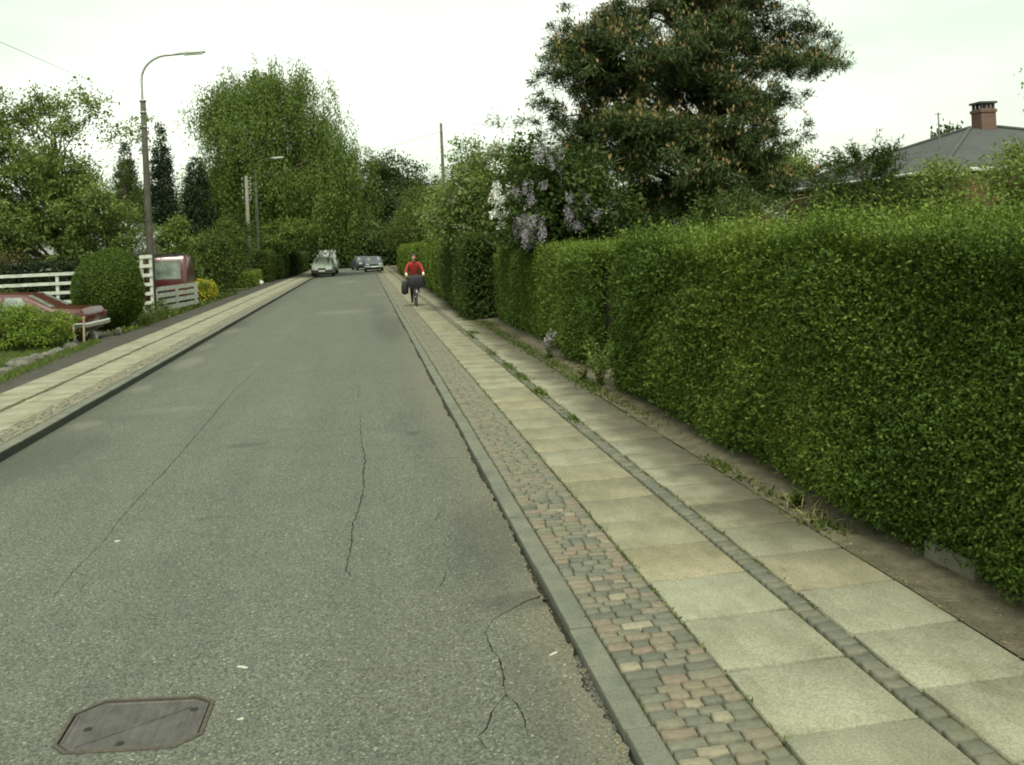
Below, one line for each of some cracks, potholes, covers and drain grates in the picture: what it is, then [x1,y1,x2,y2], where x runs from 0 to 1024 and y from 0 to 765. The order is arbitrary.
manhole cover [52,695,215,755]
crack [477,595,547,749]
crack [346,386,367,576]
